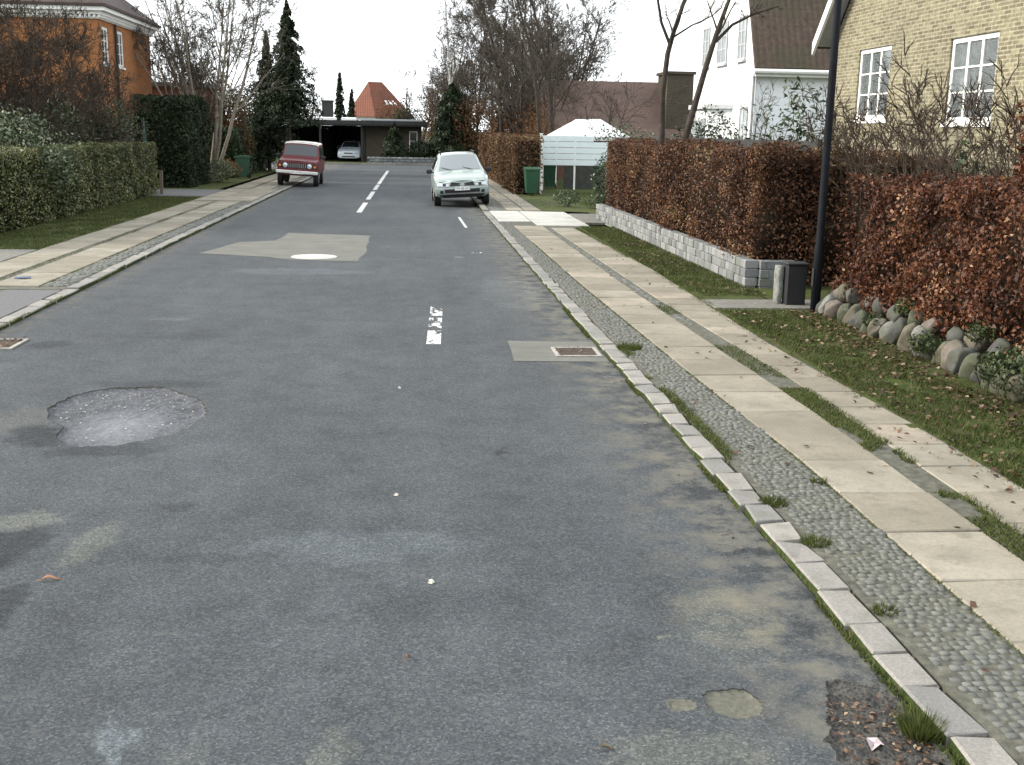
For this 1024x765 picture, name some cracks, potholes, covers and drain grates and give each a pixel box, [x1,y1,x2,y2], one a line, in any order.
pothole [822,679,951,765]
pothole [46,386,208,447]
drain grate [551,347,603,357]
